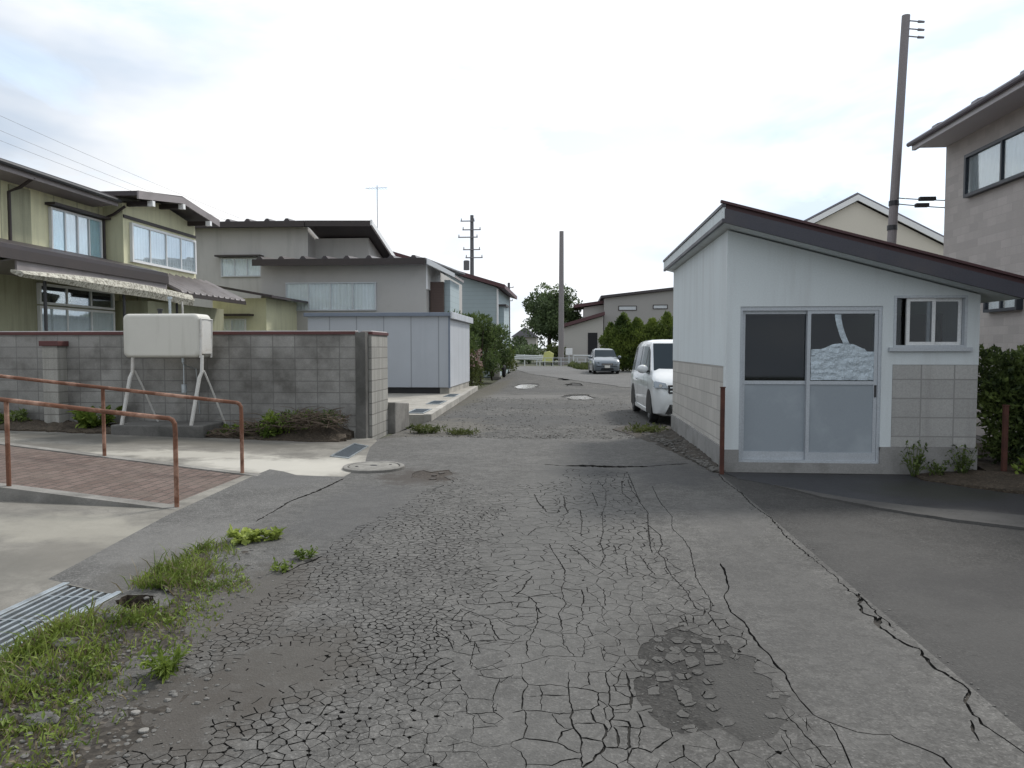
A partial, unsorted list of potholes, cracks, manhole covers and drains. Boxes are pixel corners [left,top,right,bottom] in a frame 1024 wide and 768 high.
crack [423,469,1024,768]
crack [53,473,513,768]
drain grate [0,582,122,653]
manhole cover [343,461,405,473]
drain grate [330,443,369,459]
pothole [633,625,790,743]
